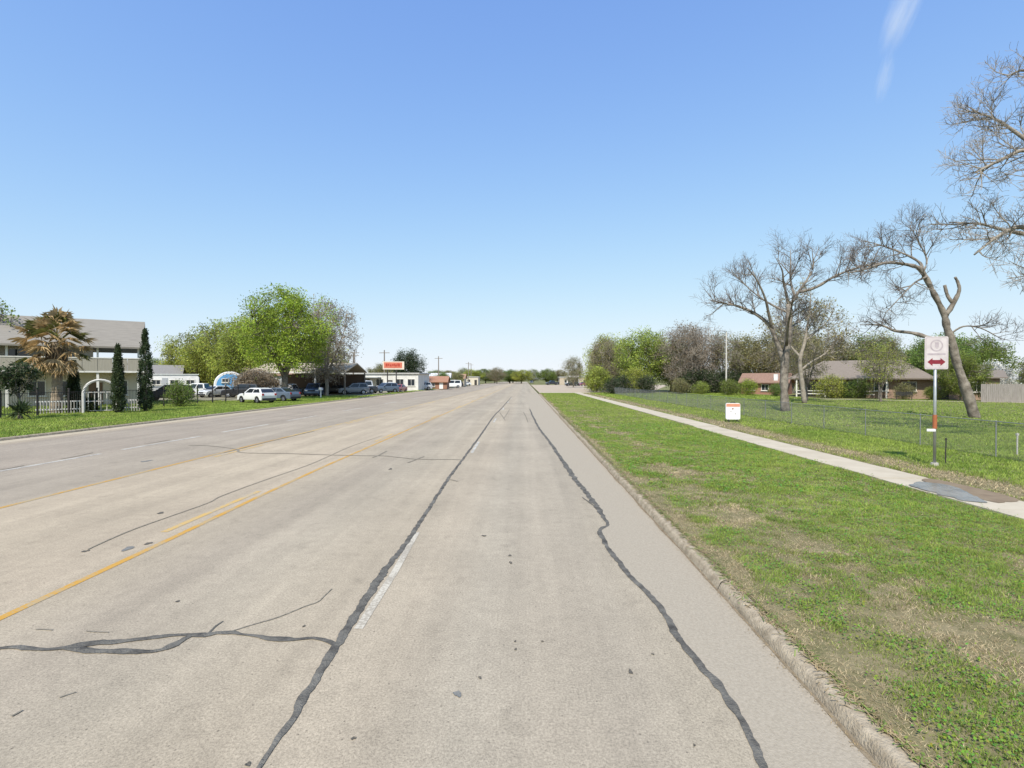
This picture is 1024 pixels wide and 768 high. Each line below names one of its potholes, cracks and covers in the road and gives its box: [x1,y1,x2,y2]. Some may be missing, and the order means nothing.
crack [0,588,336,654]
crack [88,435,383,549]
crack [201,445,464,463]
